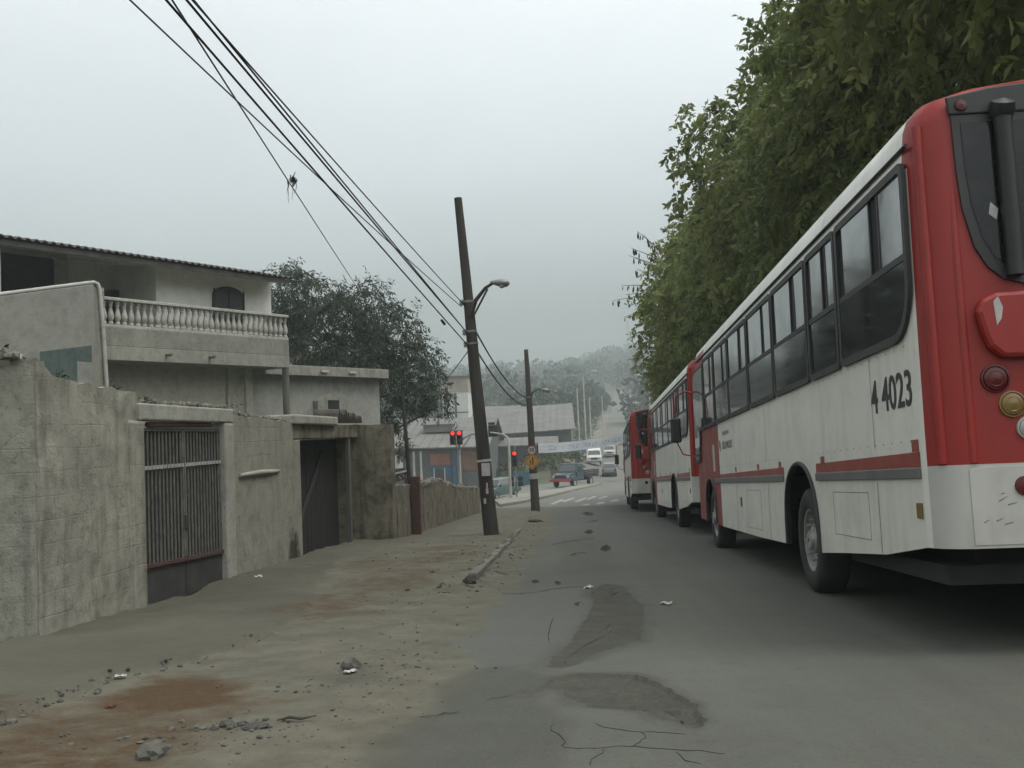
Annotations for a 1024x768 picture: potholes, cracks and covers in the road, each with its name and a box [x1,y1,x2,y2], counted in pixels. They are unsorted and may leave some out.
pothole [595,544,617,552]
crack [552,520,598,556]
crack [494,571,584,595]
crack [550,723,724,766]
